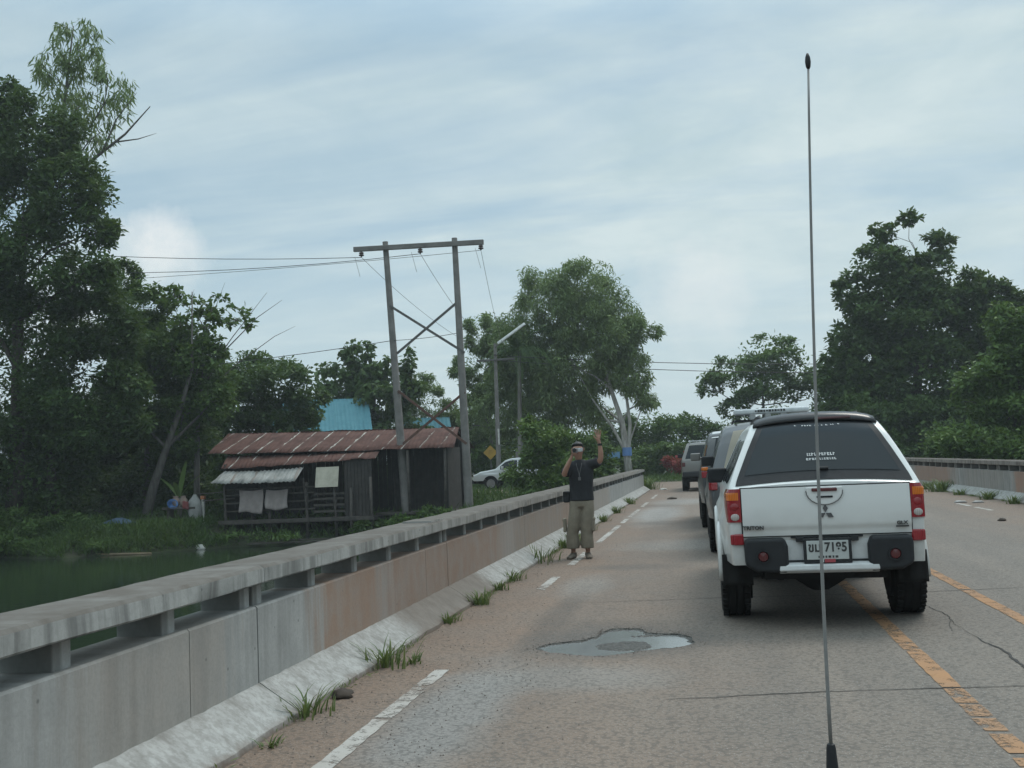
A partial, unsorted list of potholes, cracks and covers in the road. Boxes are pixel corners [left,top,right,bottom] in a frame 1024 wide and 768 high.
pothole [536,628,695,656]
crack [584,587,1024,667]
